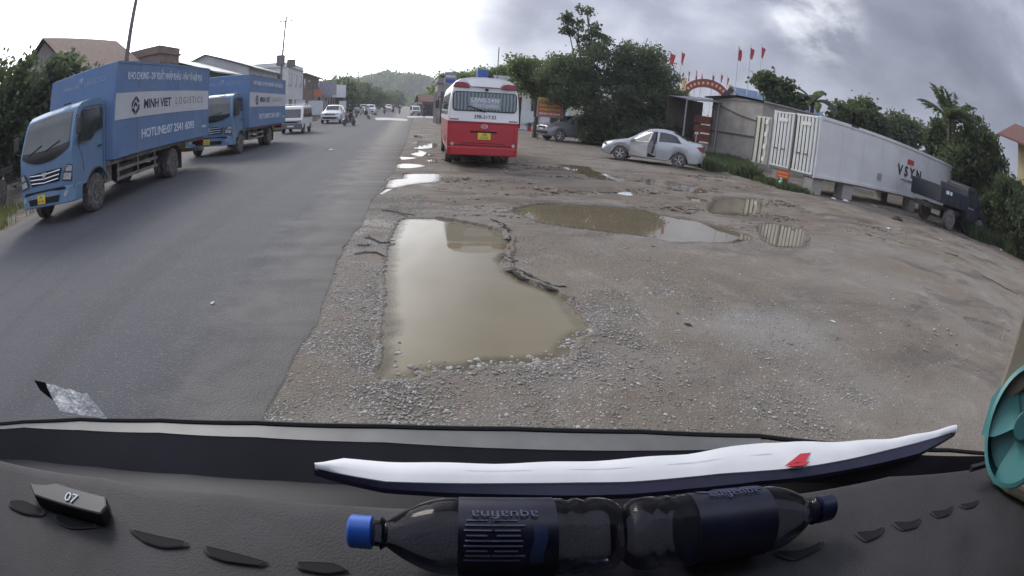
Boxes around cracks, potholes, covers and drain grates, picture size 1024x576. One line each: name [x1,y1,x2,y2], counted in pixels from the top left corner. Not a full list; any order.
pothole [509,202,759,244]
pothole [703,197,768,216]
pothole [554,164,634,182]
pothole [383,173,443,189]
crack [490,218,566,290]
pothole [365,216,600,384]
pothole [752,221,815,249]
